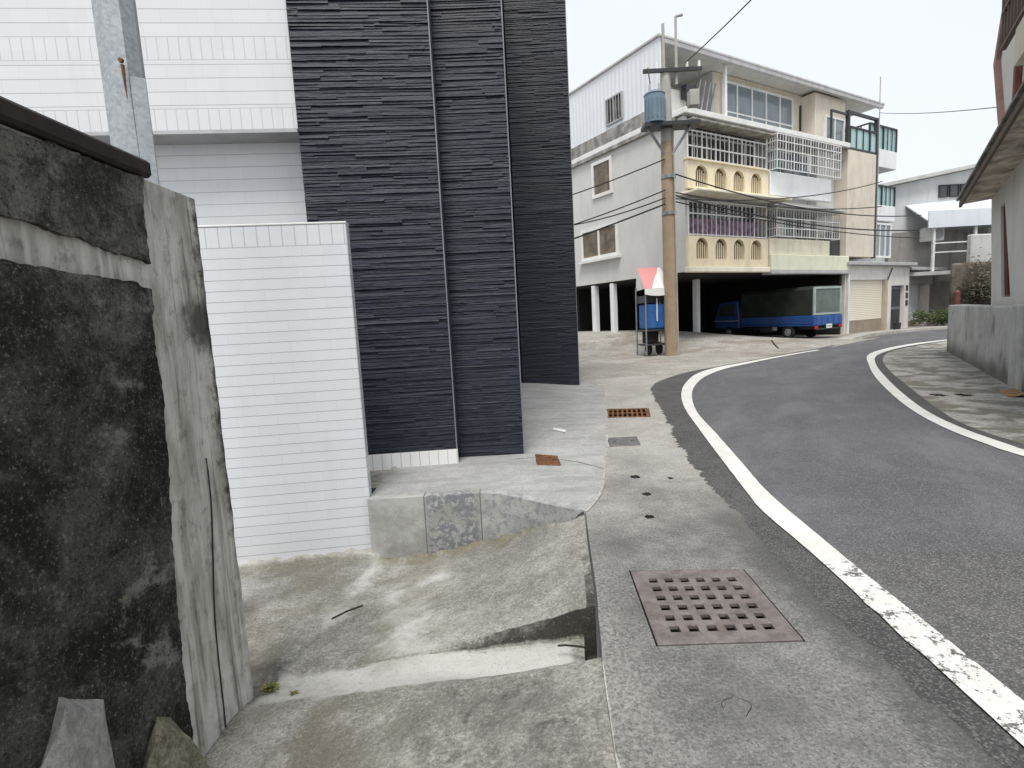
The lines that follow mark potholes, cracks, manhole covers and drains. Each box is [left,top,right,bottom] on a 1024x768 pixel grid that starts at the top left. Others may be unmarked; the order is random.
drain grate [607,408,651,418]
manhole cover [535,454,561,466]
manhole cover [608,436,640,447]
drain grate [629,569,806,647]
